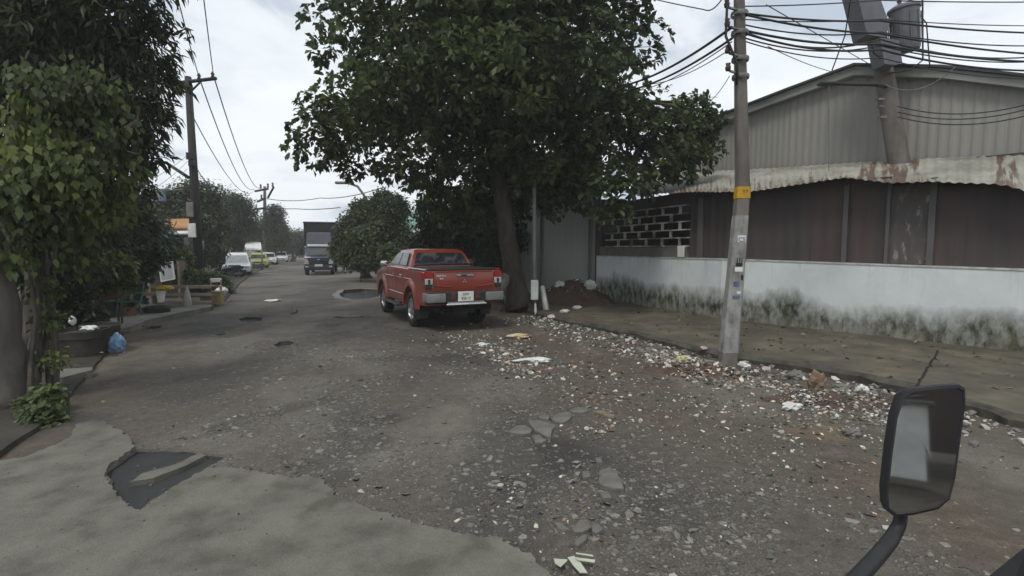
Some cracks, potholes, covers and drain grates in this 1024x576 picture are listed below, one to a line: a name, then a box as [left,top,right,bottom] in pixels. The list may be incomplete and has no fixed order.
crack [915,350,939,386]
pothole [267,340,299,349]
pothole [105,446,232,510]
